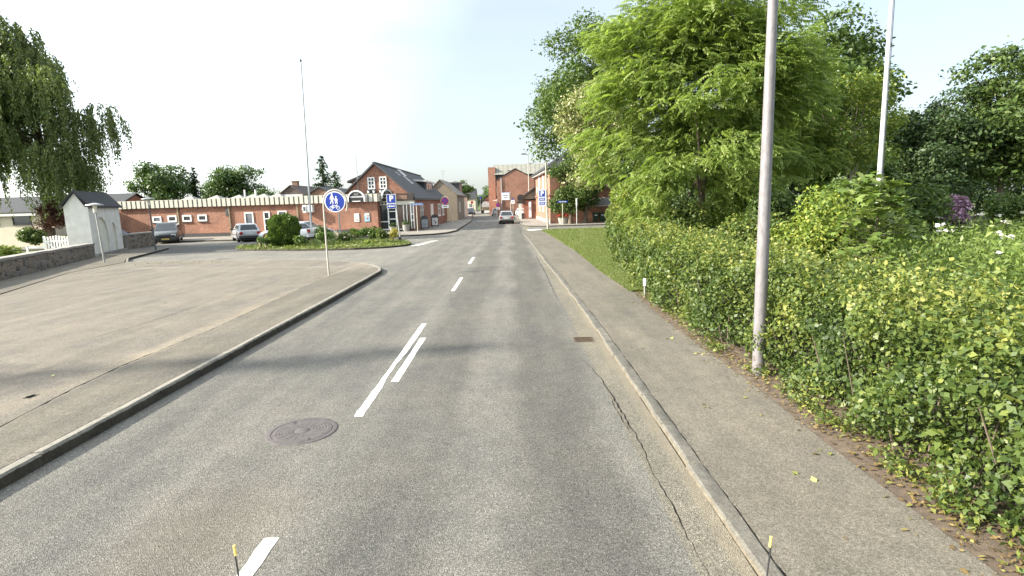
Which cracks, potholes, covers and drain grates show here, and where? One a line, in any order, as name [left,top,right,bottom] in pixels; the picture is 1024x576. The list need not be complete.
manhole cover [265,418,338,446]
crack [585,362,710,576]
